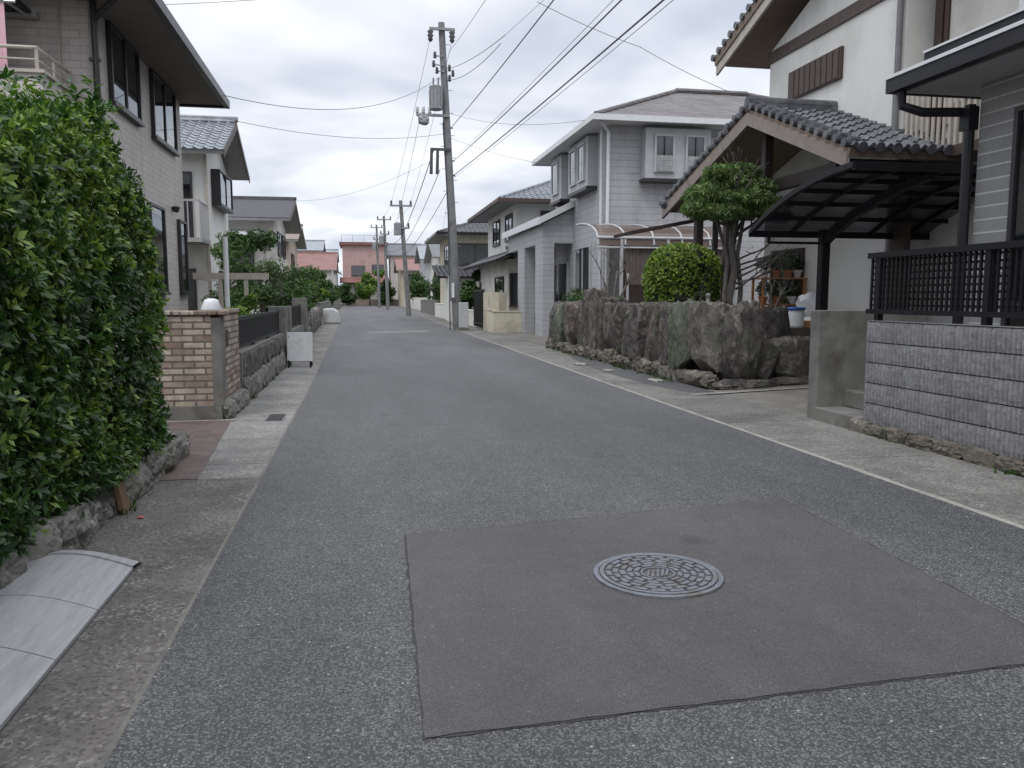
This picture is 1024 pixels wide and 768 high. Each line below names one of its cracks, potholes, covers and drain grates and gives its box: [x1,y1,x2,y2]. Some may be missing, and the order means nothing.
manhole cover [594,553,724,599]
